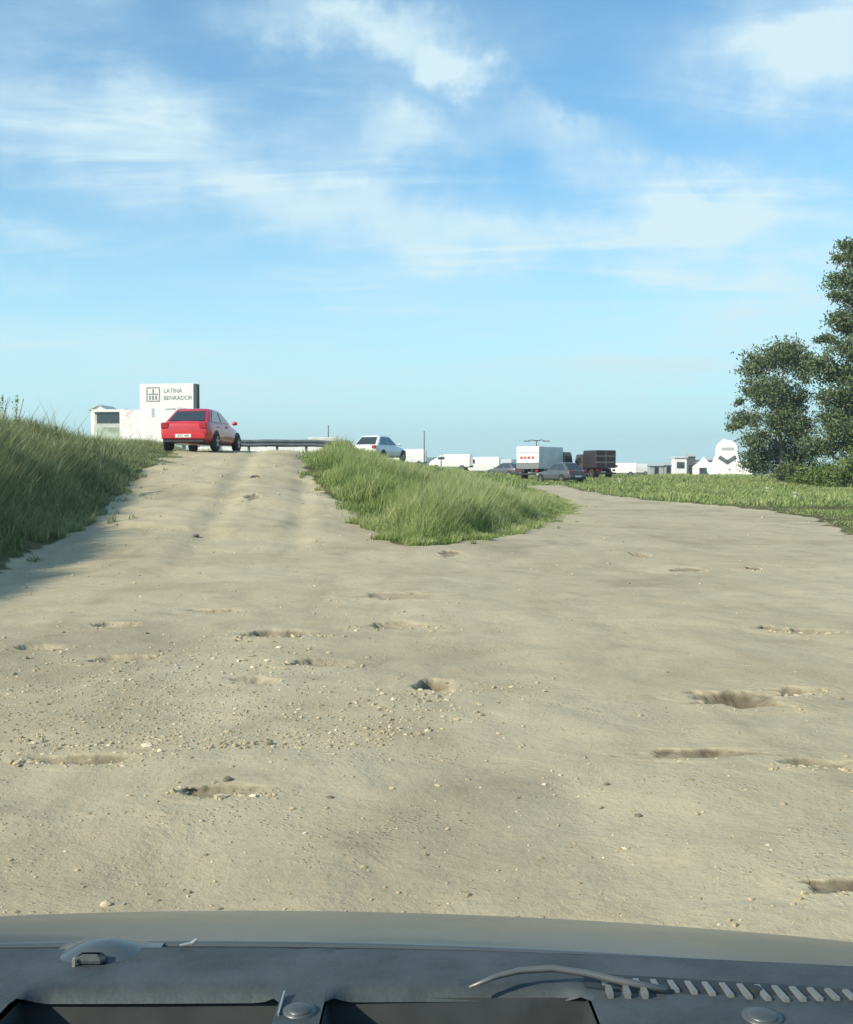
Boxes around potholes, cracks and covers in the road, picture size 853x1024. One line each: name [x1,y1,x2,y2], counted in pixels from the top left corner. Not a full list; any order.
pothole [652,685,817,715]
pothole [342,617,457,632]
pothole [149,774,303,804]
pothole [63,619,166,631]
pothole [0,747,167,772]
pothole [389,674,480,698]
pothole [746,754,853,775]
pothole [739,621,798,636]
pothole [213,625,344,641]
pothole [597,742,818,763]
